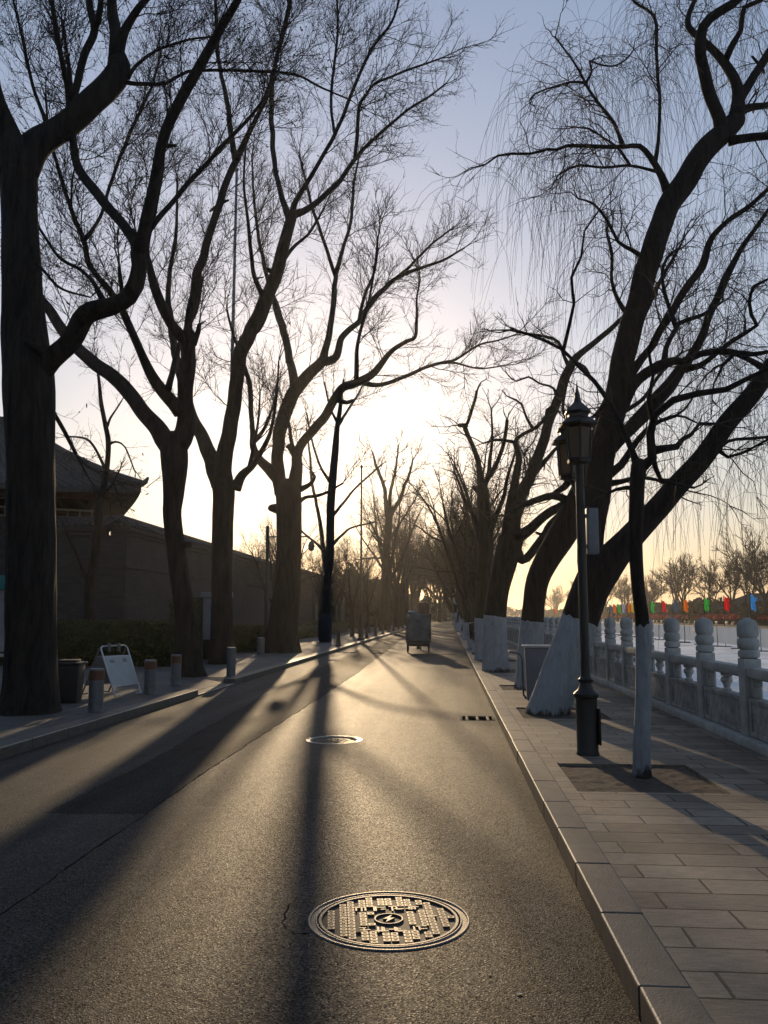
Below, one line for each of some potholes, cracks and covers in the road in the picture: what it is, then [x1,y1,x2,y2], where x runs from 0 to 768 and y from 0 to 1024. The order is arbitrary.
manhole cover [306,736,362,744]
manhole cover [307,891,470,951]
crack [281,901,302,935]
